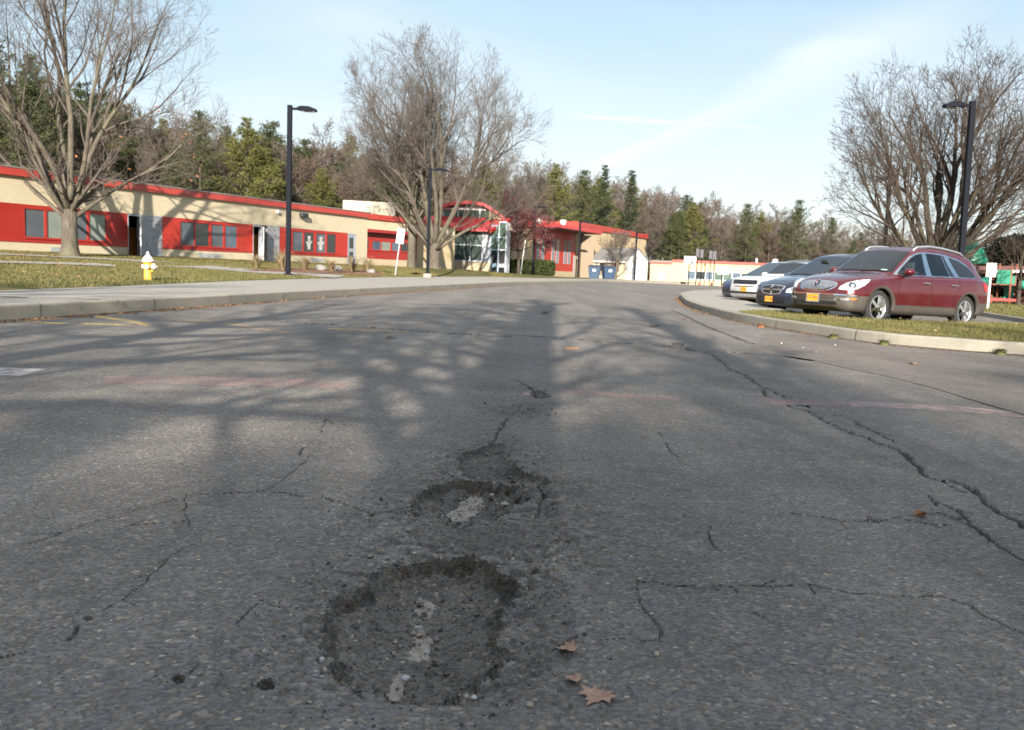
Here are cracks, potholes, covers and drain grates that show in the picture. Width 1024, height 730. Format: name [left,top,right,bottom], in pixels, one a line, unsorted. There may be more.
pothole [410,479,525,523]
crack [30,493,203,611]
pothole [318,554,529,707]
pothole [511,491,531,506]
crack [551,580,1021,653]
crack [680,347,1024,560]
crack [492,418,508,443]
crack [200,418,409,517]
pothole [456,443,551,488]
